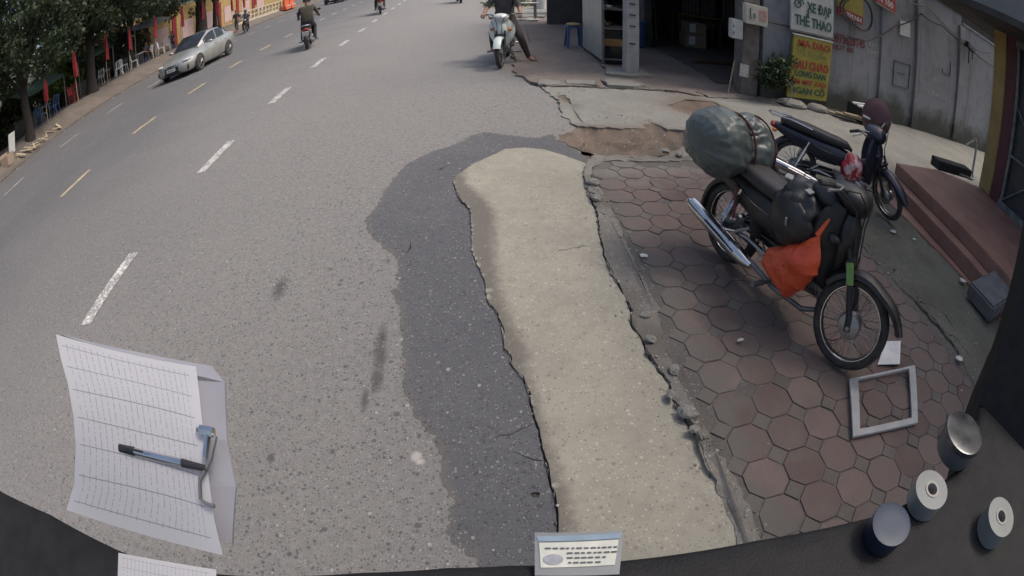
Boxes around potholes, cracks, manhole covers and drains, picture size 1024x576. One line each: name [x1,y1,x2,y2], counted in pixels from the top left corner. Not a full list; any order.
pothole [558,122,684,157]
pothole [670,101,718,116]
crack [488,304,559,533]
